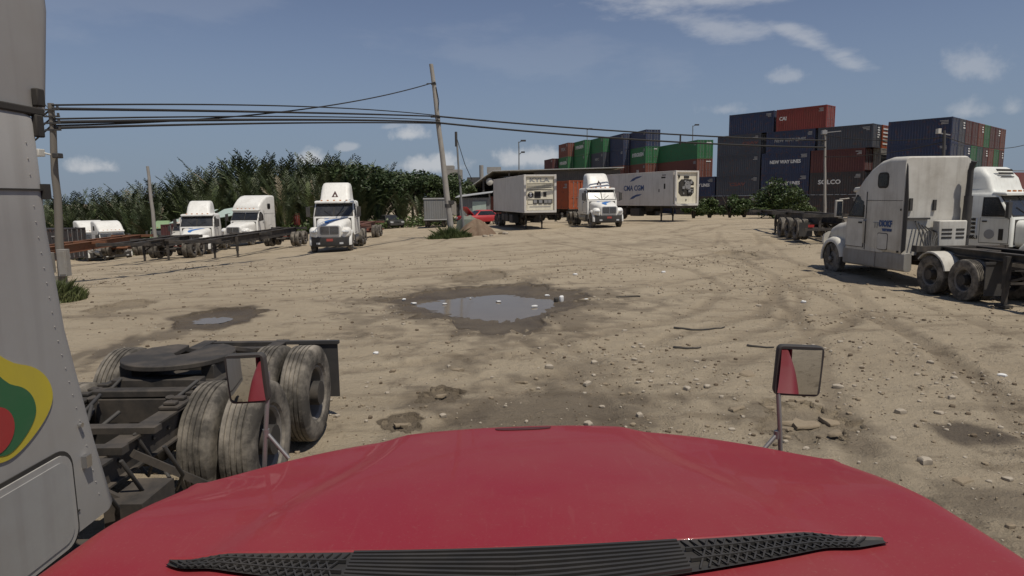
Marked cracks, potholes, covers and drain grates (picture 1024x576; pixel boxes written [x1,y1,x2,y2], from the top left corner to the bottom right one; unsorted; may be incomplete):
pothole [376,412,424,433]
pothole [375,282,593,335]
pothole [414,385,467,403]
pothole [169,306,270,330]
